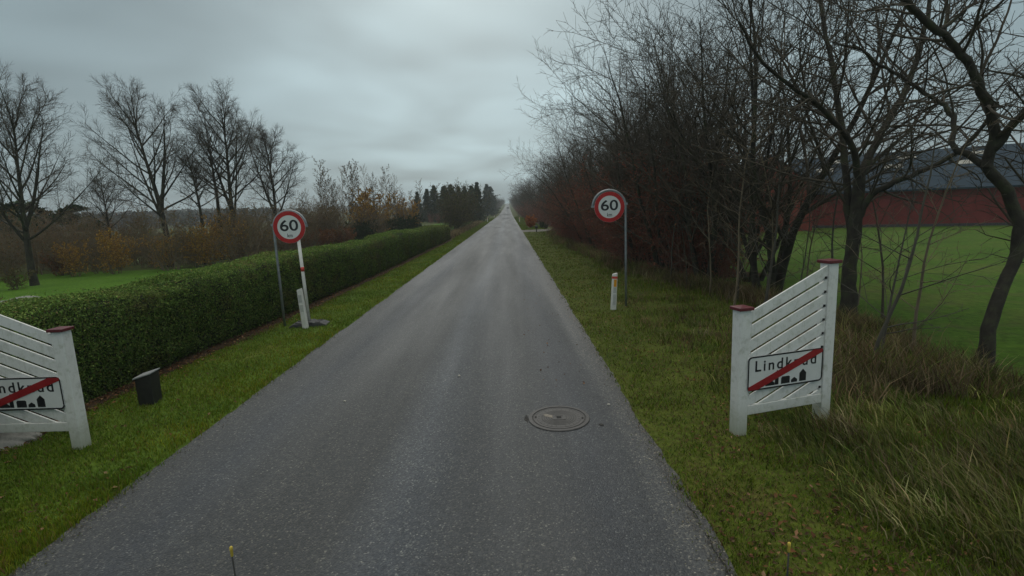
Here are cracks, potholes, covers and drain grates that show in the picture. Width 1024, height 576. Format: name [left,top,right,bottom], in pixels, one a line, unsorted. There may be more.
manhole cover [528,406,590,431]
